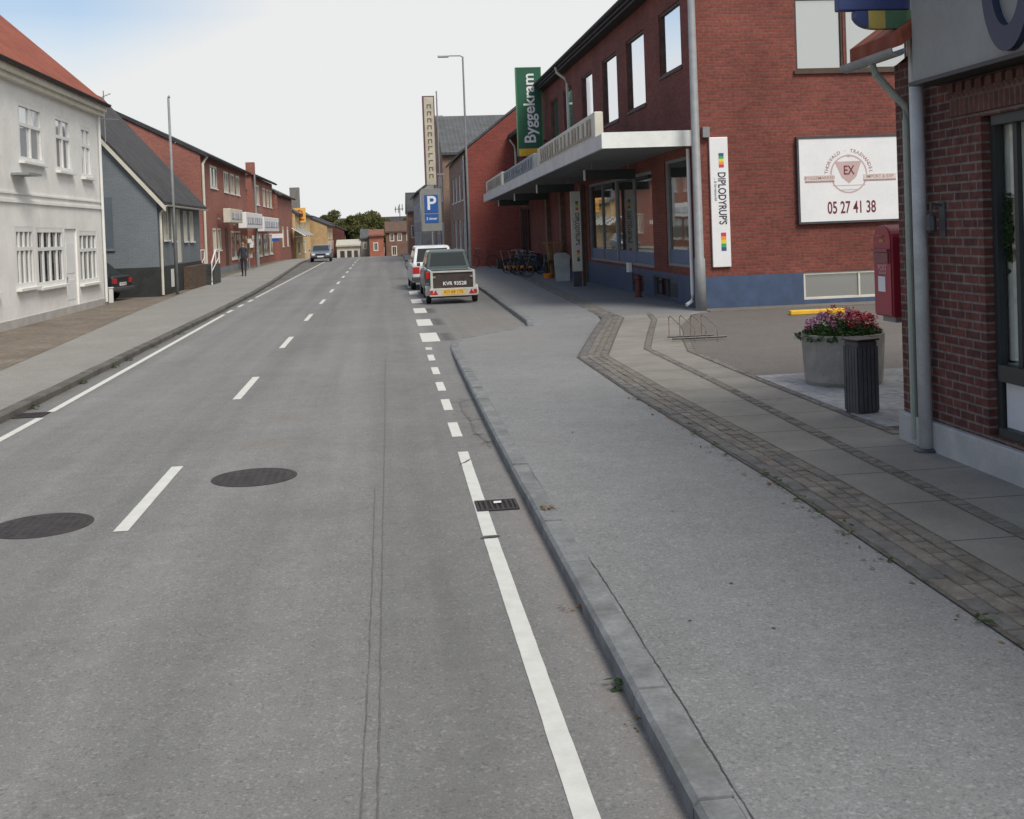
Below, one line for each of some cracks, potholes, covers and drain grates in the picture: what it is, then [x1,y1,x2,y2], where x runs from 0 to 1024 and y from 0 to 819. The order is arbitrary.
manhole cover [0,513,94,539]
manhole cover [211,468,297,487]
drain grate [474,498,520,512]
crack [451,399,494,464]
